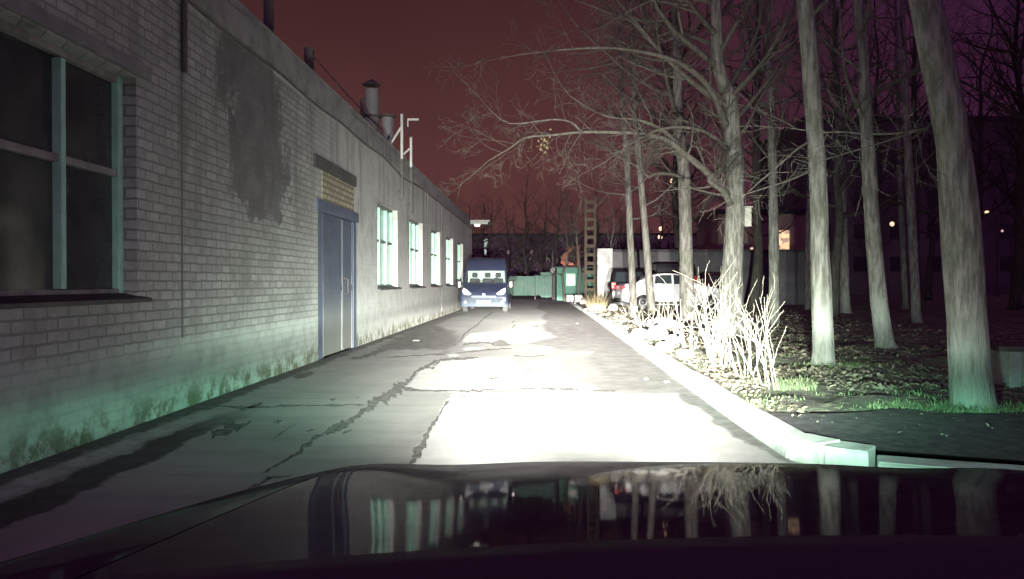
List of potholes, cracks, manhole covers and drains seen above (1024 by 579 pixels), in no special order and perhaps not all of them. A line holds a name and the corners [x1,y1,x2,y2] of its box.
crack [211,312,615,489]
